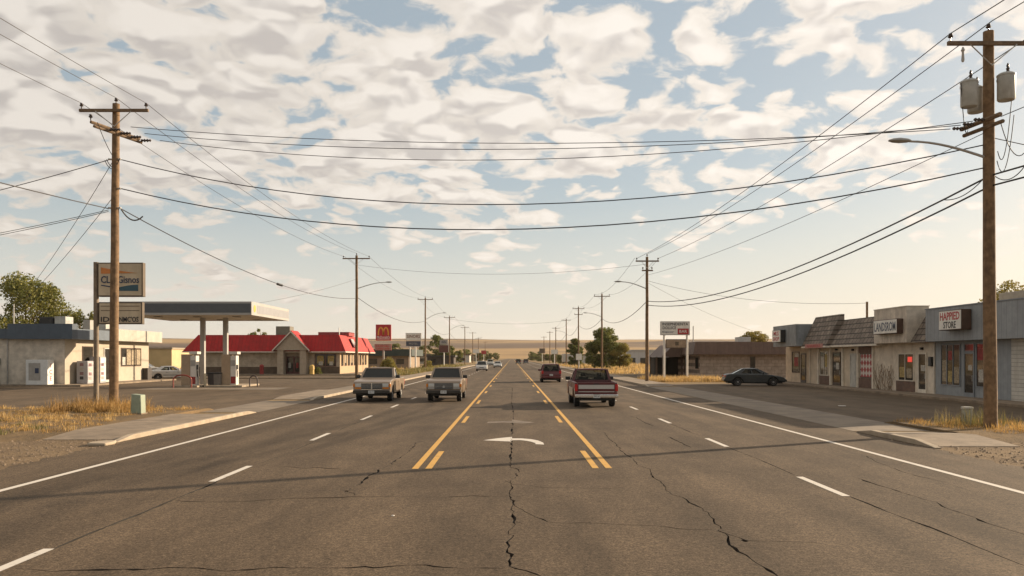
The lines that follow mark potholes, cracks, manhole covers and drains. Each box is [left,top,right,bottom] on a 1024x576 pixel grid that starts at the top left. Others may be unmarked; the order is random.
crack [861,457,1022,534]
crack [505,390,690,576]
crack [606,435,813,576]
